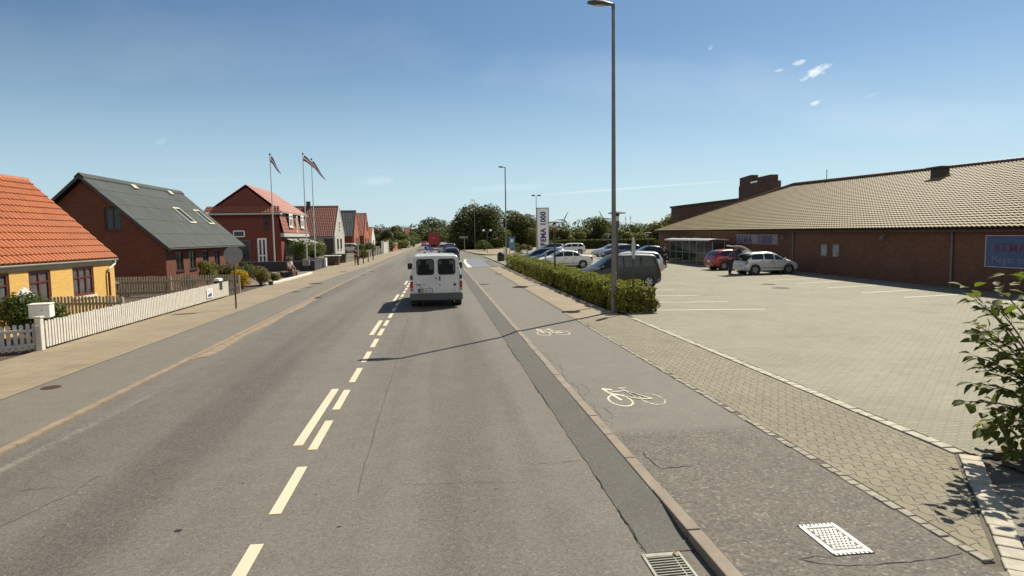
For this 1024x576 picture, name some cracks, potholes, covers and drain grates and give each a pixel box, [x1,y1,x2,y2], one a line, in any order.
crack [0,475,101,527]
crack [358,317,409,493]
crack [801,553,961,566]
crack [540,350,613,426]
drain grate [641,551,698,576]
